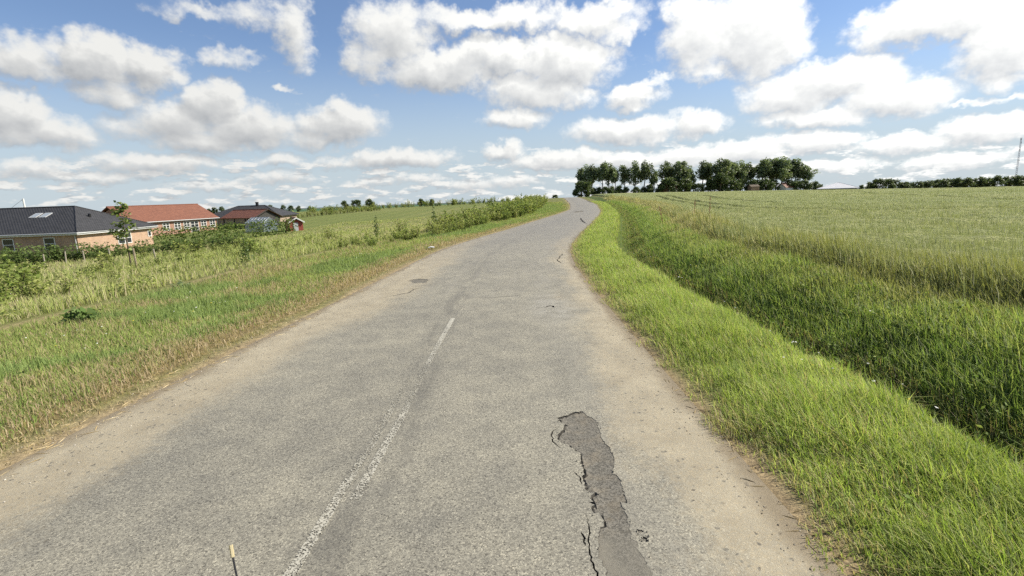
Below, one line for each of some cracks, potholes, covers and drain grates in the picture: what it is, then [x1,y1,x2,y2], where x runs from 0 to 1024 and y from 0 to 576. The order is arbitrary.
pothole [557,411,653,576]
